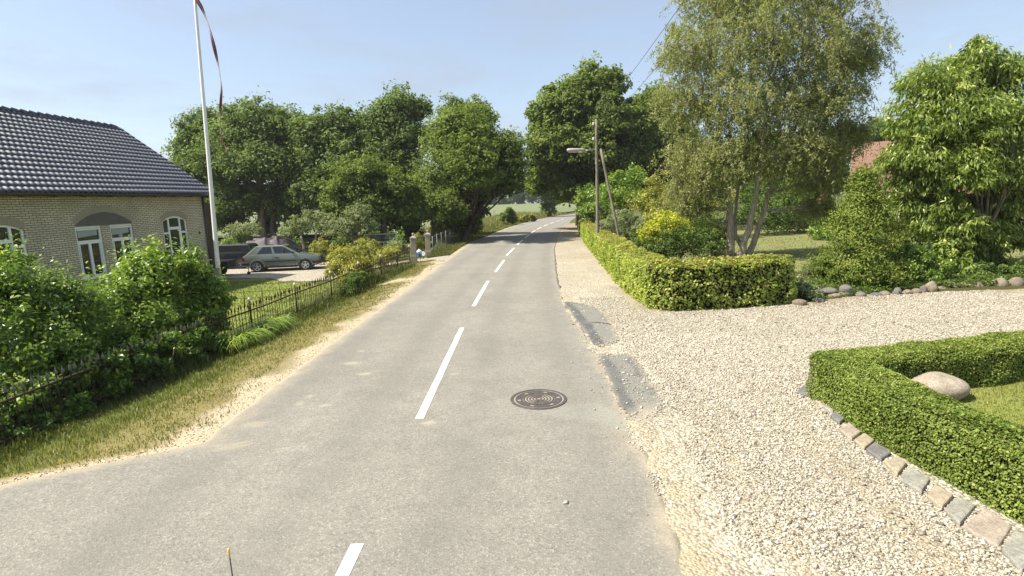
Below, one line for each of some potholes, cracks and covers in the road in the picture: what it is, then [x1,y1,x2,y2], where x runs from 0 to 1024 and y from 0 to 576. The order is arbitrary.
manhole cover [510,389,567,410]
